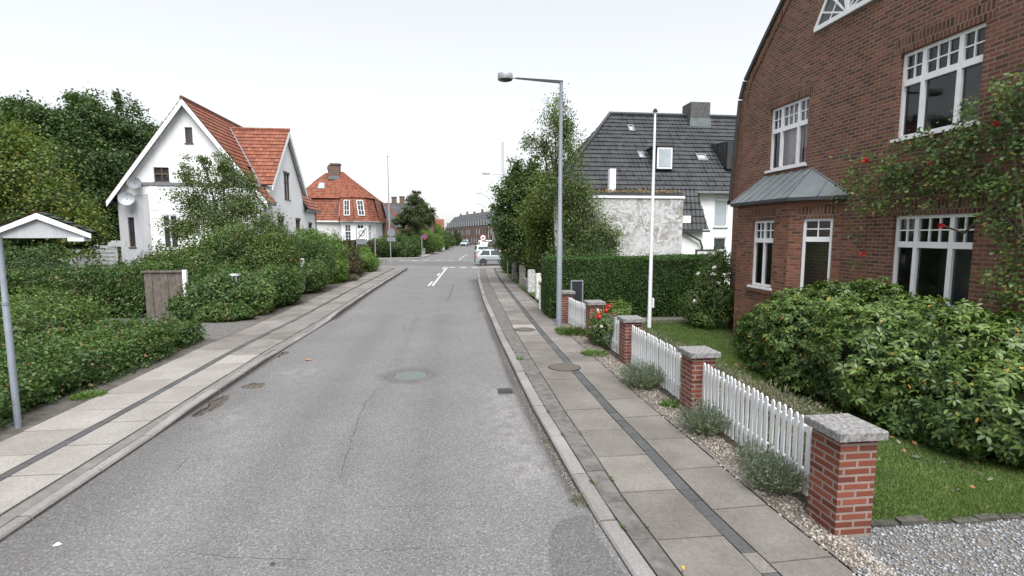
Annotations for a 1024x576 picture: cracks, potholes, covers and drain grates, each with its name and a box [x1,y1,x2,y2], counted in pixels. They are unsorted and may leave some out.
manhole cover [548,363,581,371]
crack [169,549,317,560]
manhole cover [389,370,432,381]
